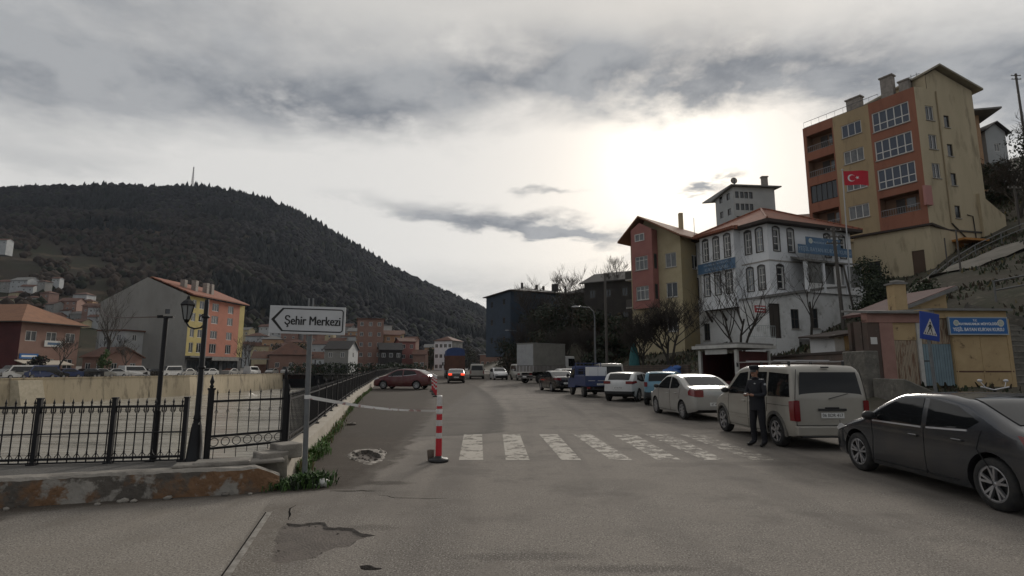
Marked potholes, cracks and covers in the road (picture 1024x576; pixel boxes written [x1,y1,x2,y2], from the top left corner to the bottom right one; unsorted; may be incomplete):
pothole [271,522,375,563]
pothole [347,448,387,465]
